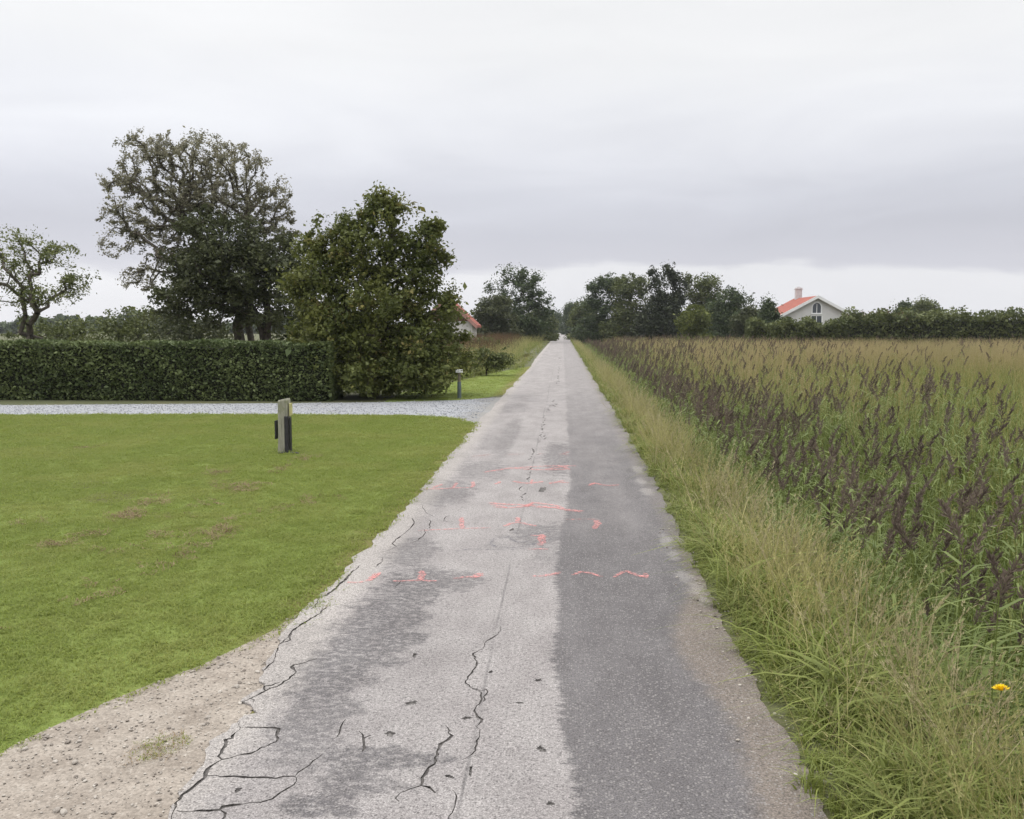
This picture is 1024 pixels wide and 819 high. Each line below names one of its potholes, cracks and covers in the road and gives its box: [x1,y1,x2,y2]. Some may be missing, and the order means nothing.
crack [242,506,448,703]
crack [171,719,371,819]
crack [395,628,501,818]
